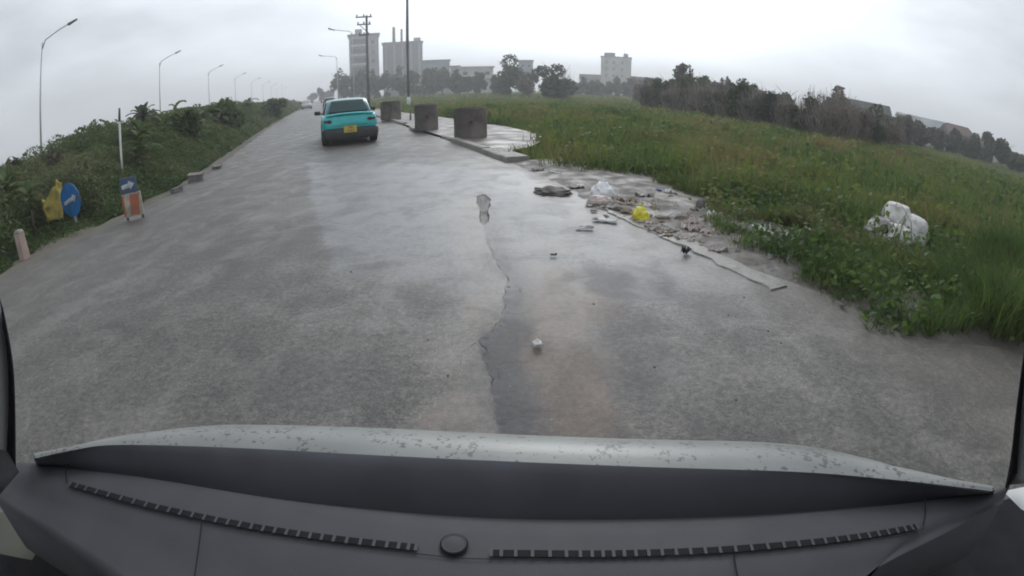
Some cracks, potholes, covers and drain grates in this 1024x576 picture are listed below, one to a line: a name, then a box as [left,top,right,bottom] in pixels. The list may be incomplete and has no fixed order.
pothole [476,194,491,225]
crack [461,236,521,424]
